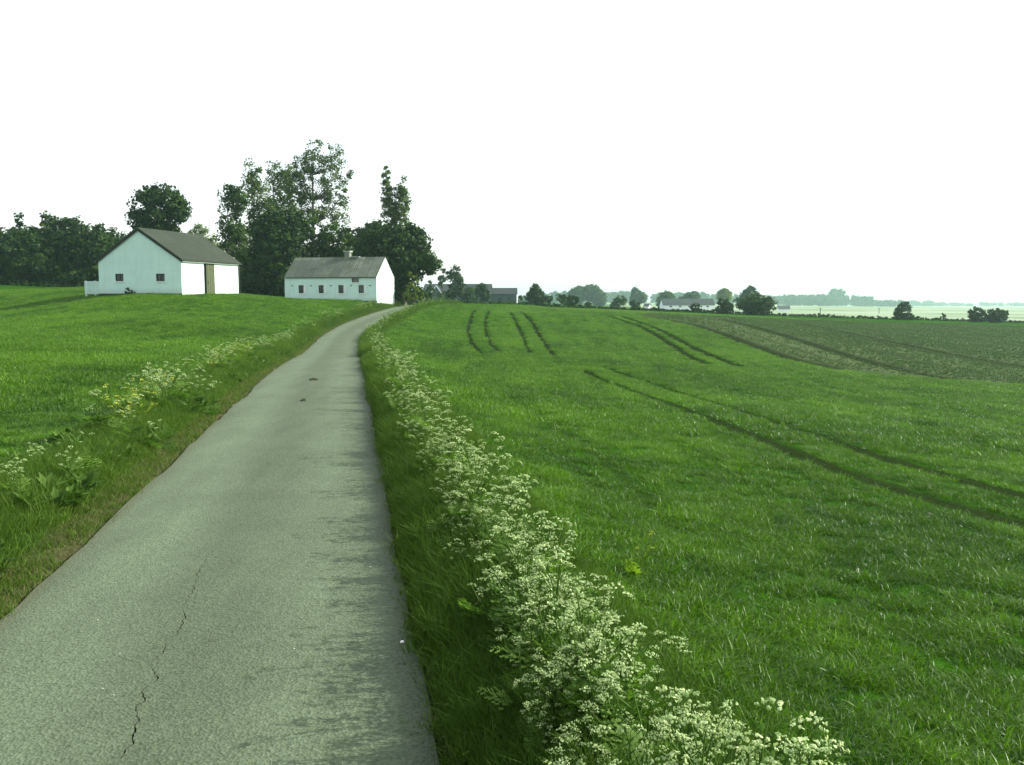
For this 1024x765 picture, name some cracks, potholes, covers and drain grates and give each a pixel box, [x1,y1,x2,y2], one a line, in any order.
crack [120,563,205,759]
